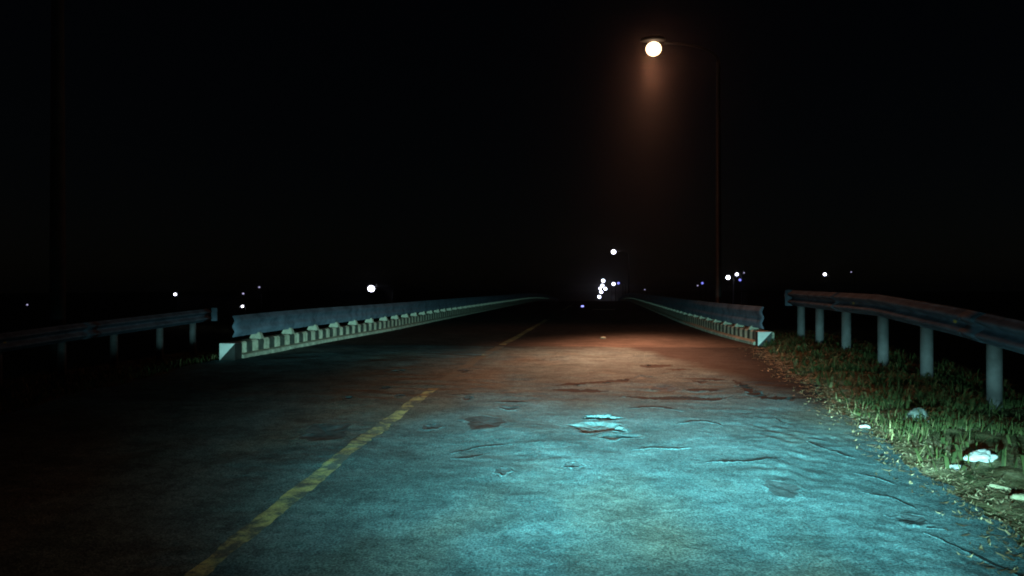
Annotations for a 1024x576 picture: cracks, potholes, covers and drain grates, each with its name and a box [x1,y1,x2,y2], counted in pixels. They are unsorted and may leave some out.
pothole [554,419,645,437]
pothole [577,414,631,422]
pothole [757,478,807,502]
pothole [287,421,361,446]
pothole [491,466,514,477]
crack [806,441,1022,576]
pothole [418,423,447,431]
pothole [888,512,935,529]
crack [552,364,814,427]
pothole [456,413,516,433]
pothole [590,430,650,443]
